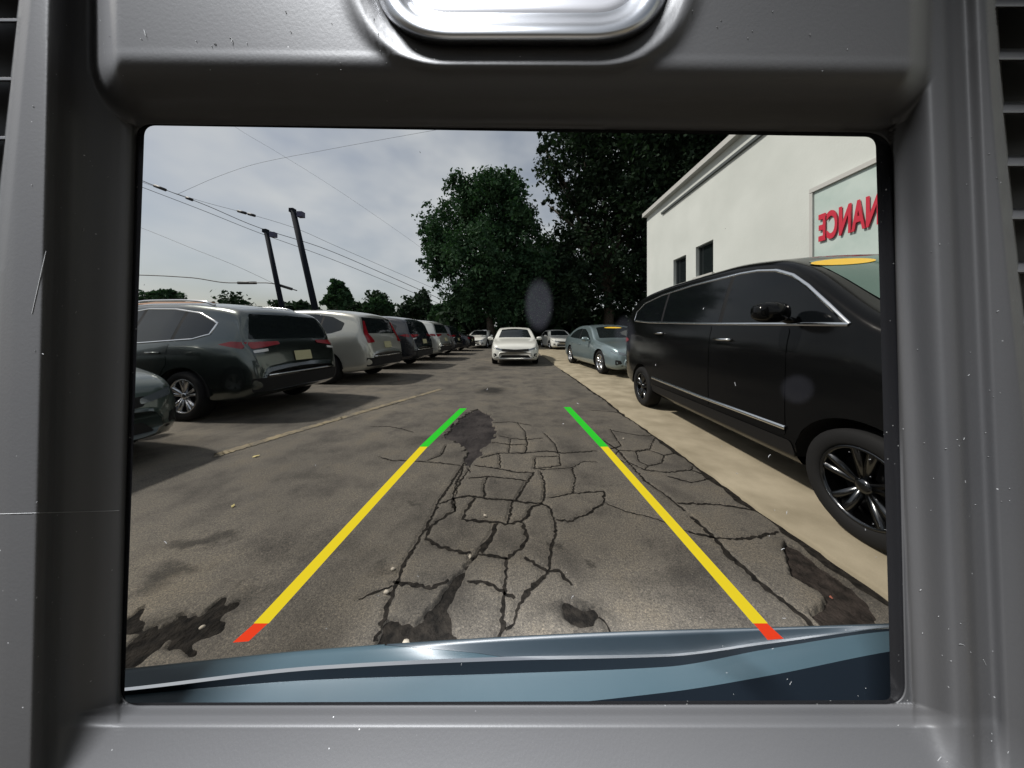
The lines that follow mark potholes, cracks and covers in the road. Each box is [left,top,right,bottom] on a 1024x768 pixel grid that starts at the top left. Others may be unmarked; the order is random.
crack [358,370,888,642]
pothole [784,545,876,626]
pothole [562,603,598,628]
